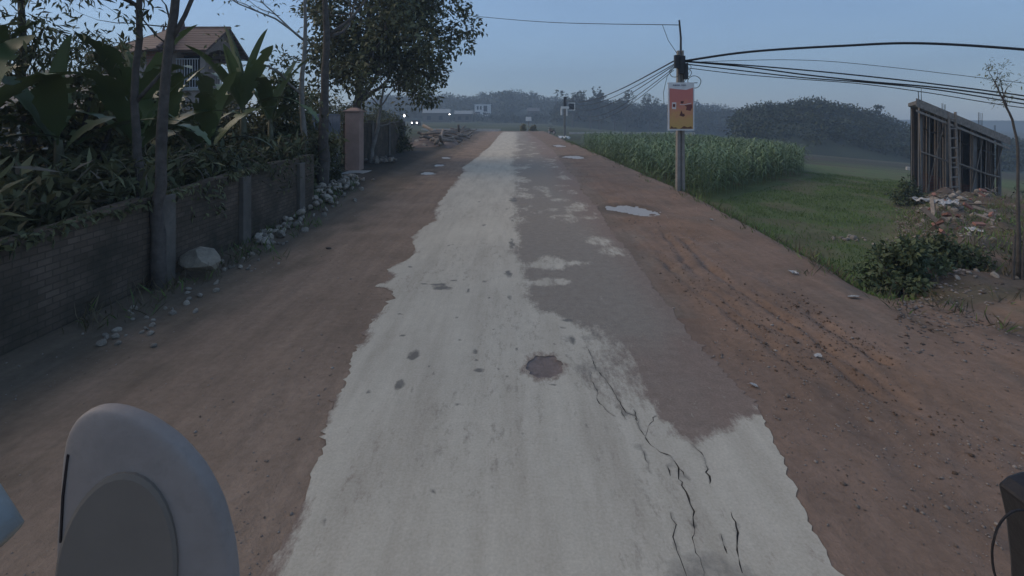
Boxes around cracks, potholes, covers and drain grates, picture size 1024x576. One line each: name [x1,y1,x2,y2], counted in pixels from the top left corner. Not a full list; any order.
crack [588,349,711,576]
crack [721,513,743,573]
pothole [526,356,563,378]
